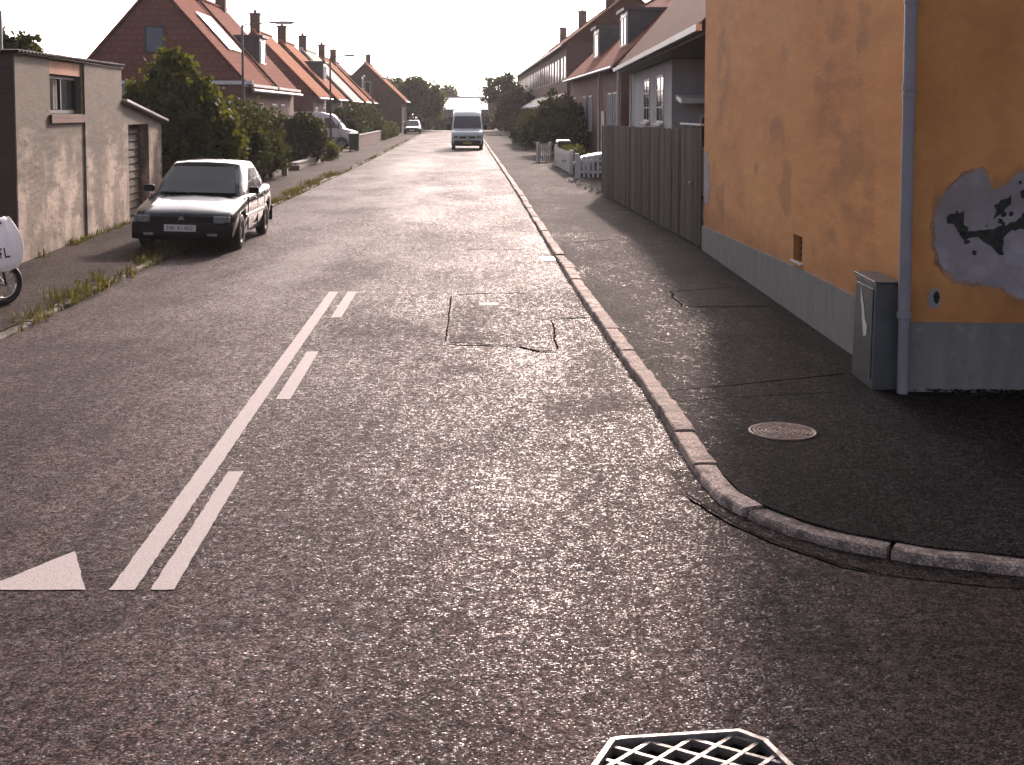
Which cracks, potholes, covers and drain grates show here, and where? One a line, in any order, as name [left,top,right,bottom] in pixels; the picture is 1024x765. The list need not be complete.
manhole cover [748,422,818,441]
